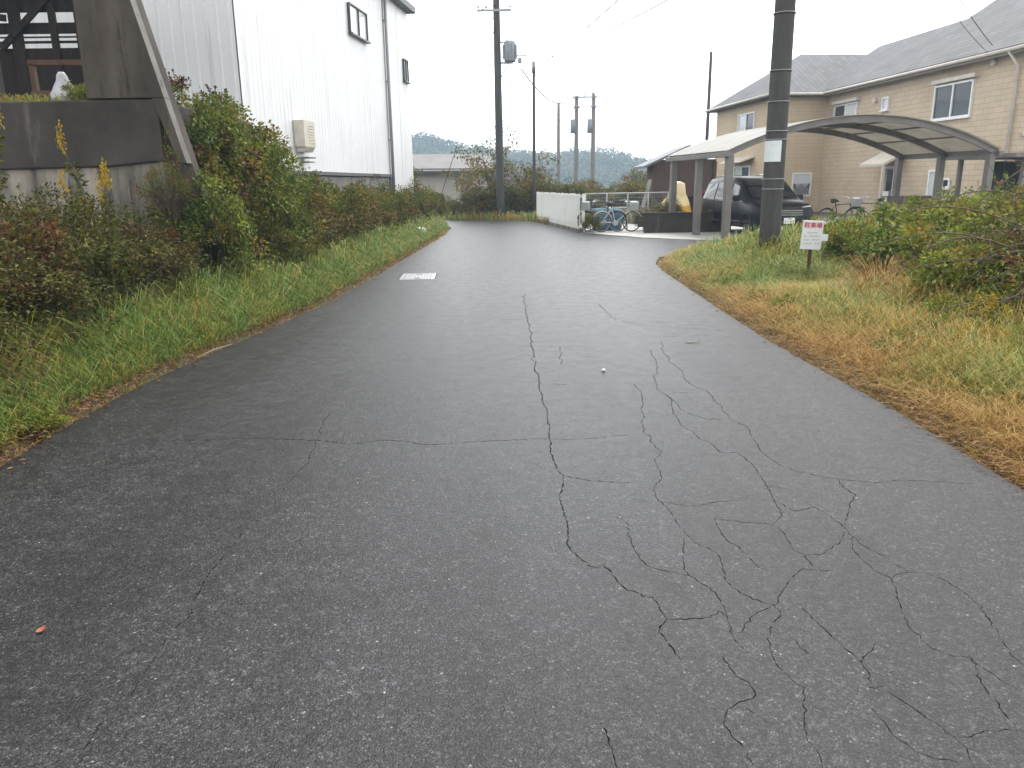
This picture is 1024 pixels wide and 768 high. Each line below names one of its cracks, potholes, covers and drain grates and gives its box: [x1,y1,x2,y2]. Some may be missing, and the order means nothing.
crack [130,533,242,697]
crack [500,294,1022,768]
crack [176,411,522,492]
